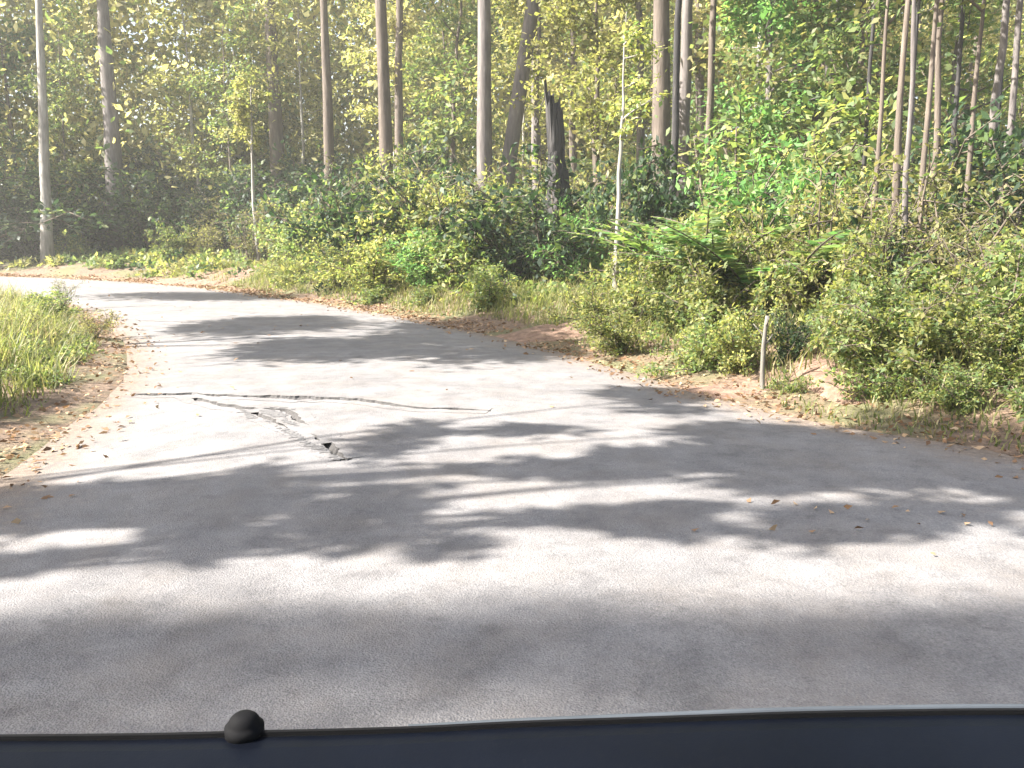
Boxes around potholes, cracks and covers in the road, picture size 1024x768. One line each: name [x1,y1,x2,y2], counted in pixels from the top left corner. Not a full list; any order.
crack [120,390,492,461]
